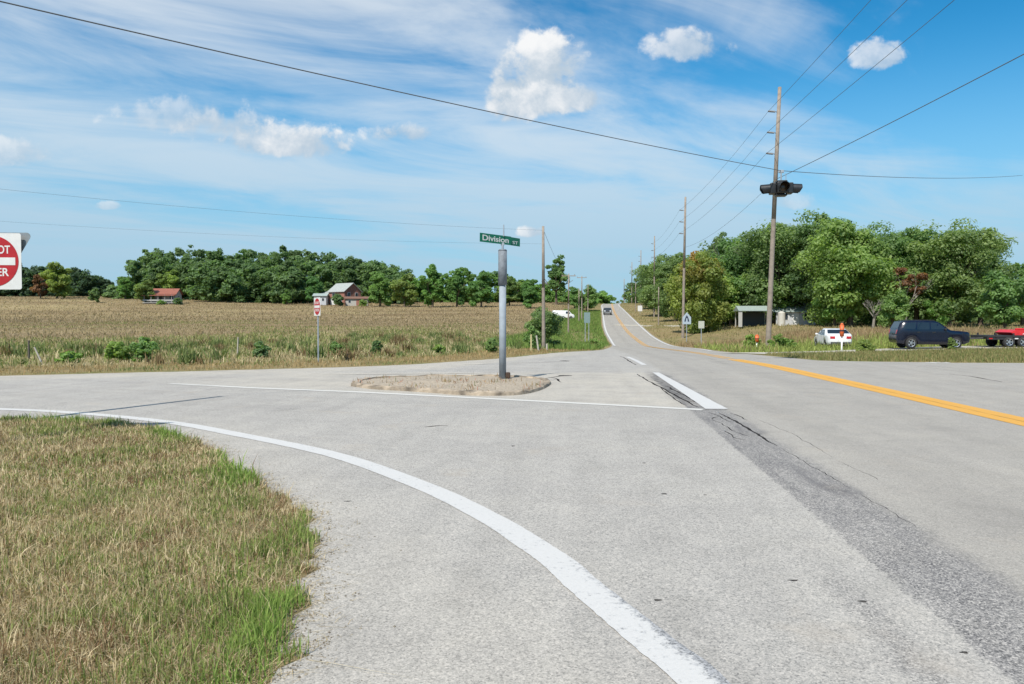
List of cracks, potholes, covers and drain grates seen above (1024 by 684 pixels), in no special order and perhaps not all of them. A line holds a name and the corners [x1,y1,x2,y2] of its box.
crack [620,356,916,527]
